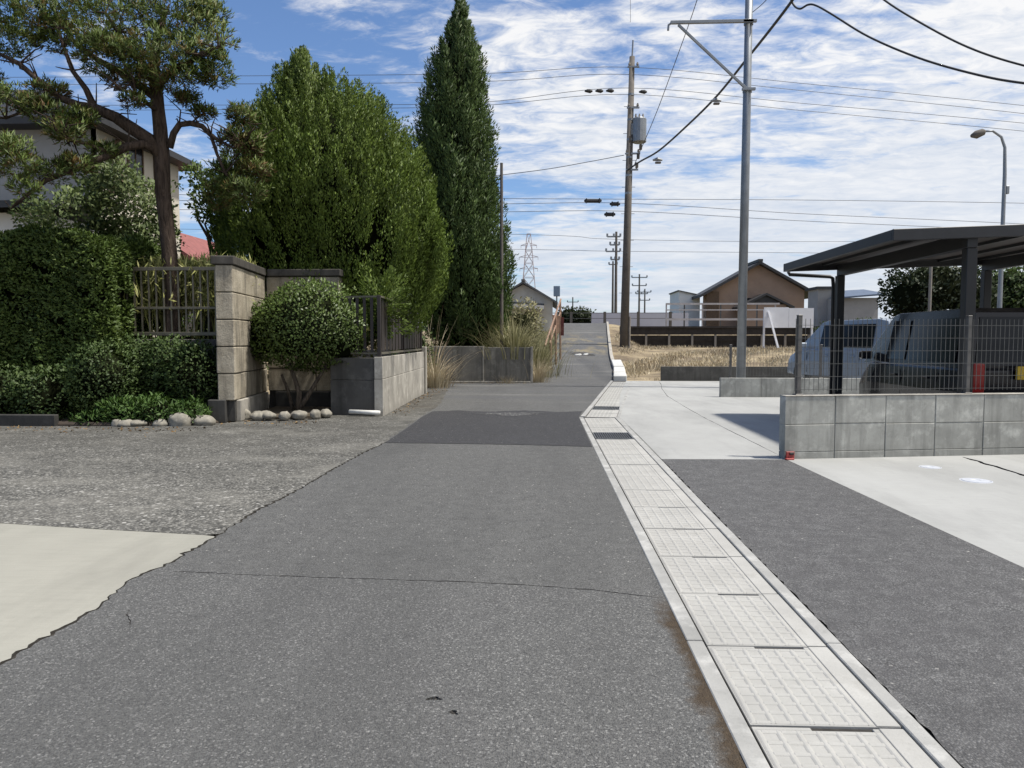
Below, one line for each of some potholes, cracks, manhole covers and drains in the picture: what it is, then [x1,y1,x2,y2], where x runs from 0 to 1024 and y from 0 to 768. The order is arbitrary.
crack [0,443,658,665]
